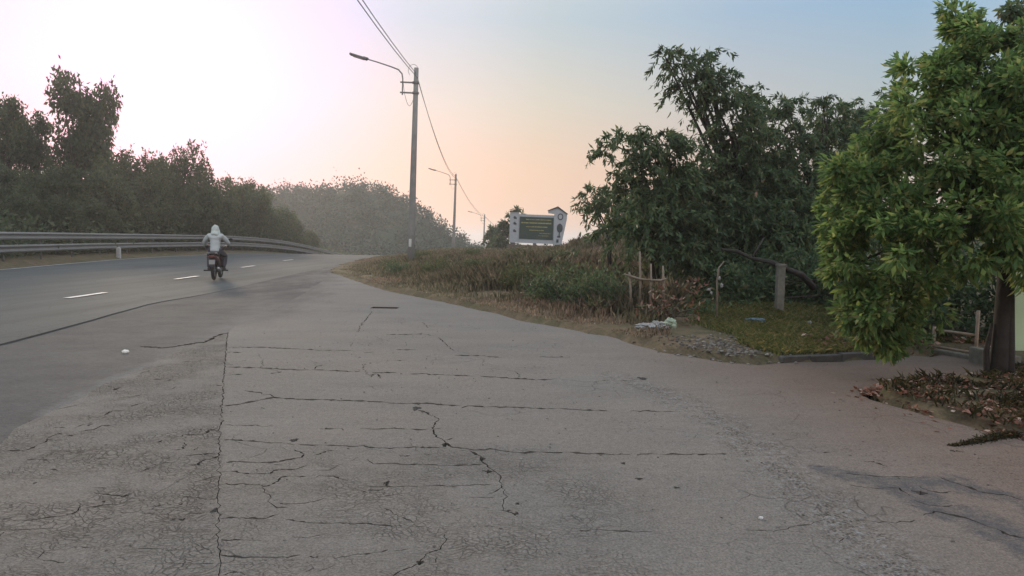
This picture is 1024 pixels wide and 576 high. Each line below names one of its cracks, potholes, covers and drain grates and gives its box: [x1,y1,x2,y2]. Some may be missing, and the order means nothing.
crack [233,311,496,378]
crack [0,374,725,538]
